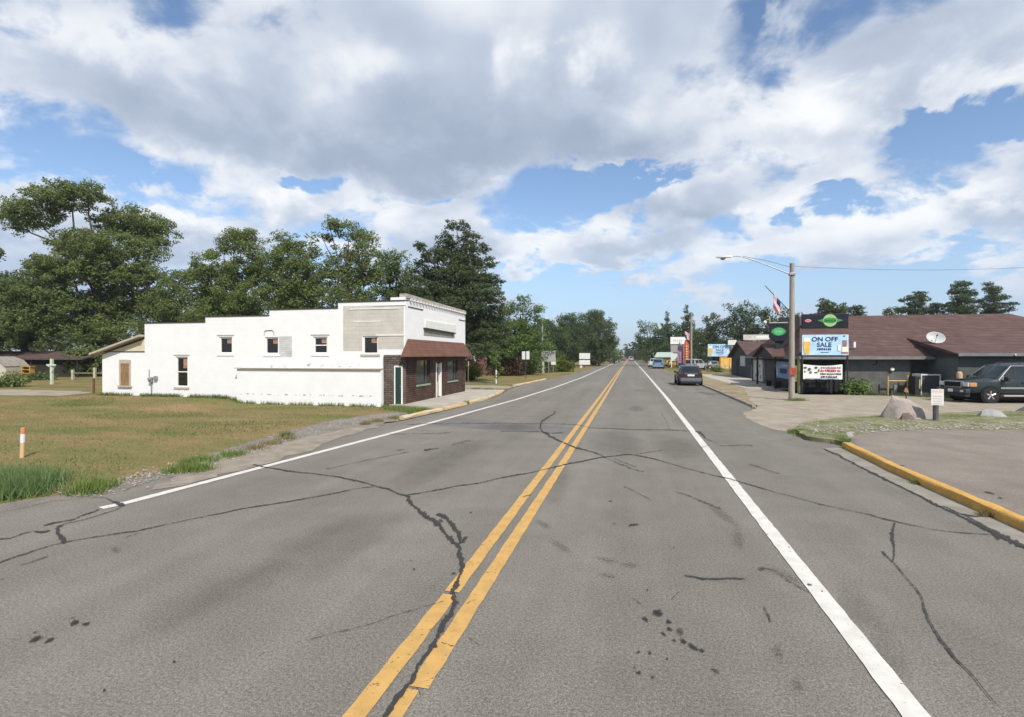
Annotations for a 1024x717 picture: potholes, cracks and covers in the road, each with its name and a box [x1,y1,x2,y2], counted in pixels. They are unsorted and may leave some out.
crack [0,411,998,706]
